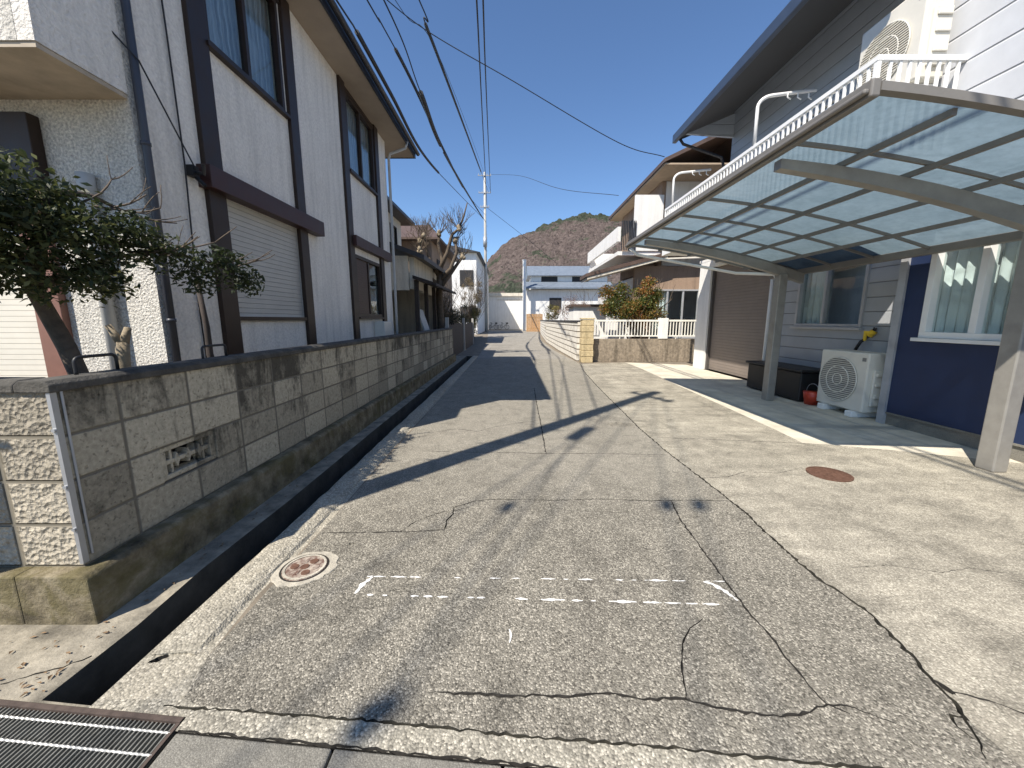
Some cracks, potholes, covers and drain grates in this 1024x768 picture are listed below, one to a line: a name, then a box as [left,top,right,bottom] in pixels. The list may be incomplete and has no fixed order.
drain grate [0,699,184,768]
manhole cover [270,551,339,587]
manhole cover [806,466,854,482]
crack [328,499,1018,733]
